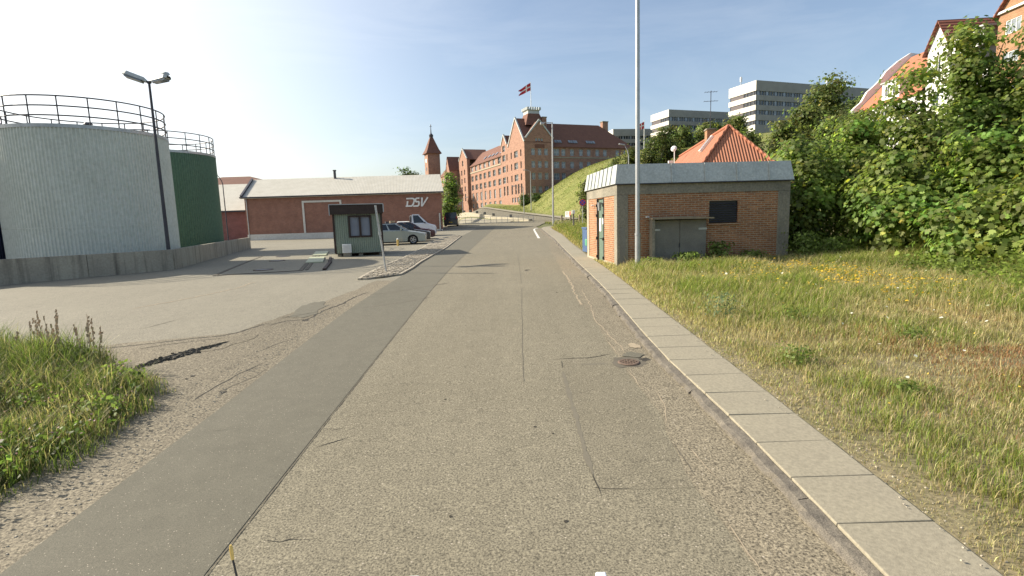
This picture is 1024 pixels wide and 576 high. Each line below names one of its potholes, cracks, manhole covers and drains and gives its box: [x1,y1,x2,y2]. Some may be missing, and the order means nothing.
crack [103,282,445,402]
crack [727,521,764,574]
crack [675,446,711,479]
crack [549,271,624,369]
